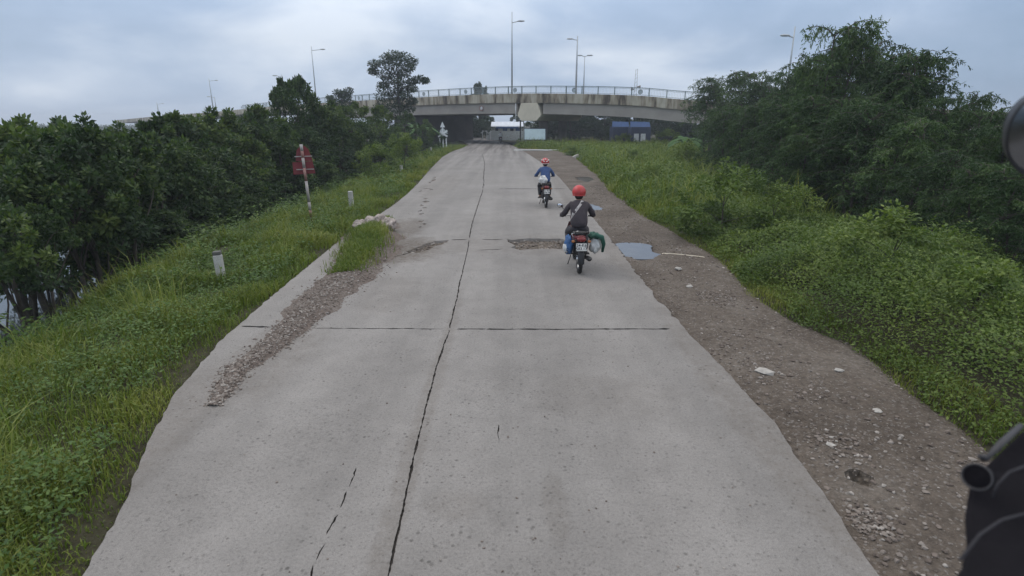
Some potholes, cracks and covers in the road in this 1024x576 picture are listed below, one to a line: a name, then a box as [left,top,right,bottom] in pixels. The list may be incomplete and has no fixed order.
crack [310,469,356,576]
pothole [406,240,448,253]
pothole [507,238,565,250]
